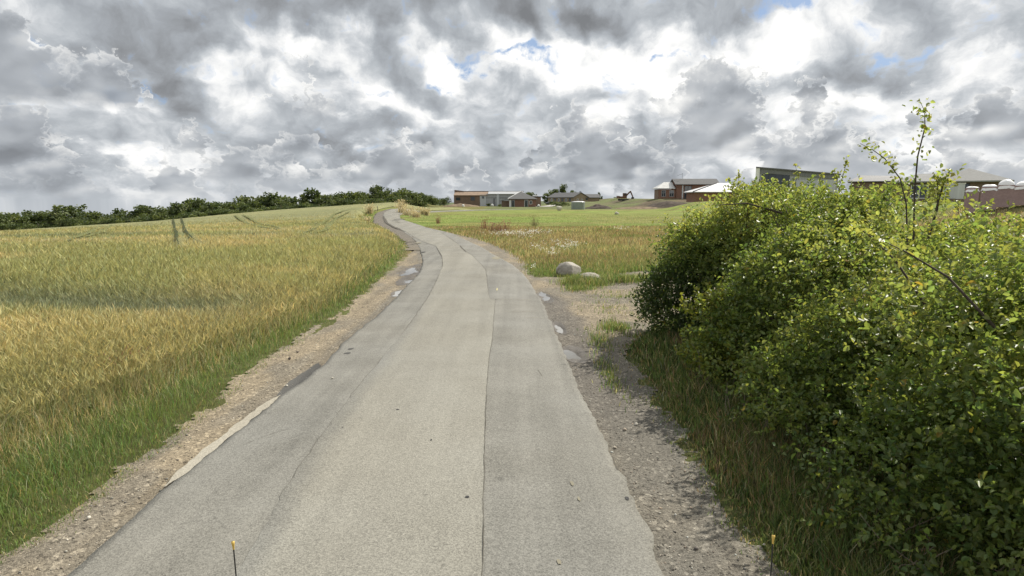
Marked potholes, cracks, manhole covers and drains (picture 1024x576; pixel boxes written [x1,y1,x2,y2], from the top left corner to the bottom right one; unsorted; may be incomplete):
pothole [562,345,588,363]
